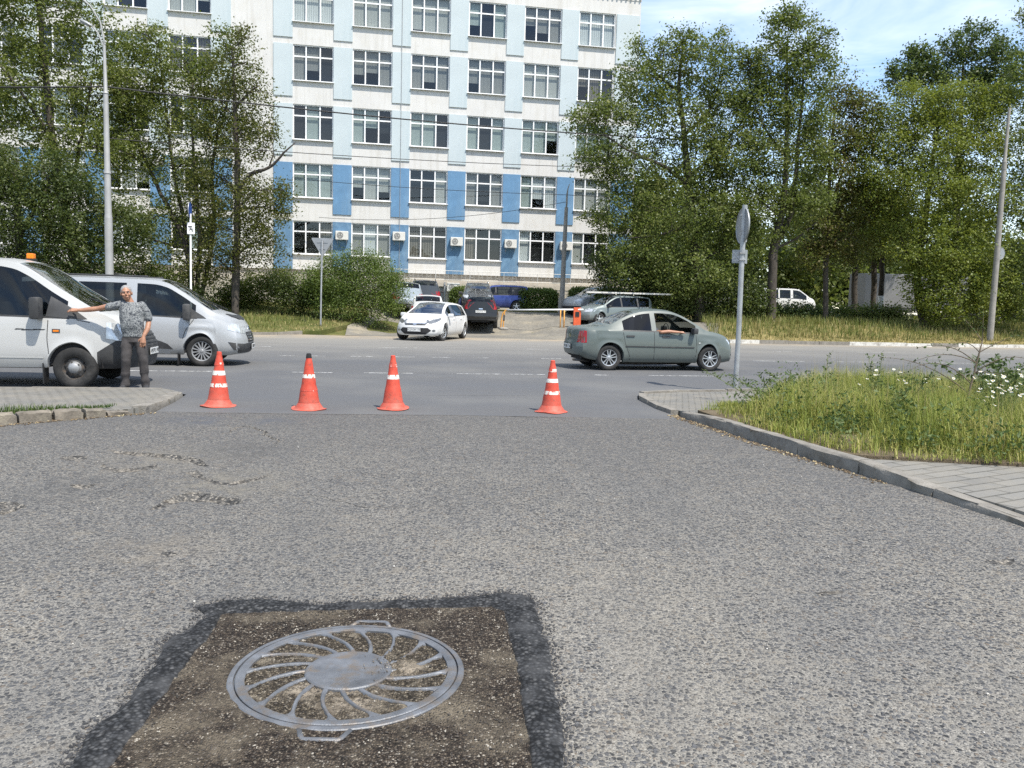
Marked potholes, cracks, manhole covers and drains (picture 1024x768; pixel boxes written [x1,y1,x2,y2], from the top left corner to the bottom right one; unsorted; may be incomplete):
manhole cover [226,620,464,742]
crack [223,426,280,447]
